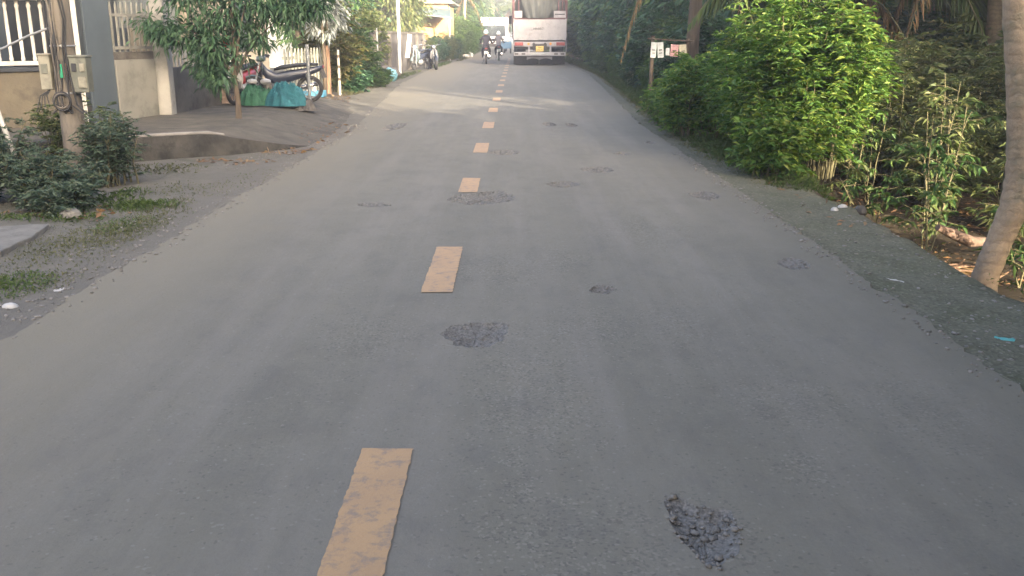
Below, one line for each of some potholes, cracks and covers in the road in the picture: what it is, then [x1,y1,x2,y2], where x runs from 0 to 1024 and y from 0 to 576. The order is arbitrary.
pothole [381,123,407,131]
pothole [662,494,744,571]
pothole [777,257,810,270]
pothole [688,191,720,200]
pothole [447,191,517,205]
pothole [589,285,617,294]
pothole [440,322,509,348]
